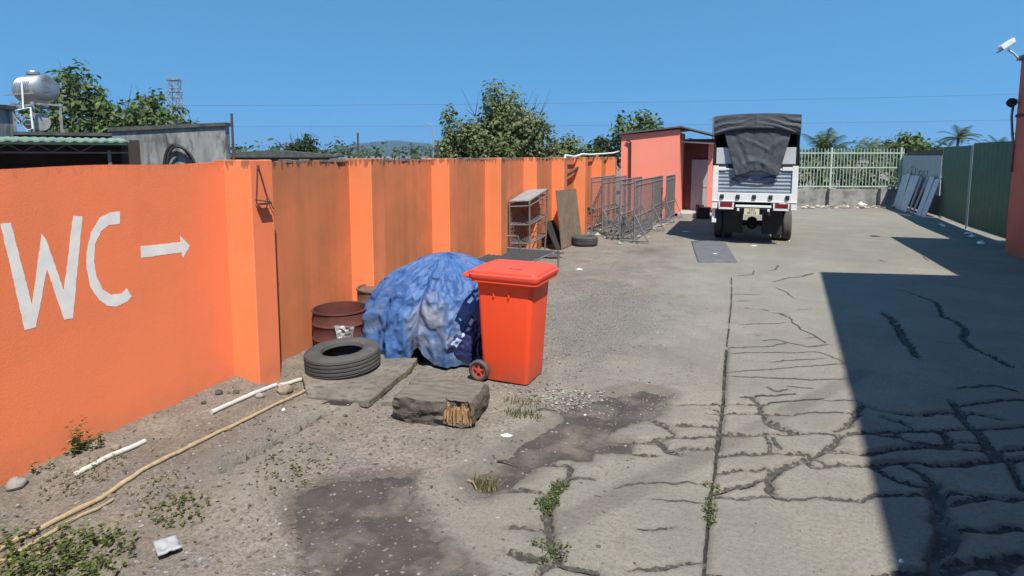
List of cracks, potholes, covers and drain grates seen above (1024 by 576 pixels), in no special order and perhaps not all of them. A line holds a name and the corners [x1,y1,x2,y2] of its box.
crack [507,265,1024,576]
